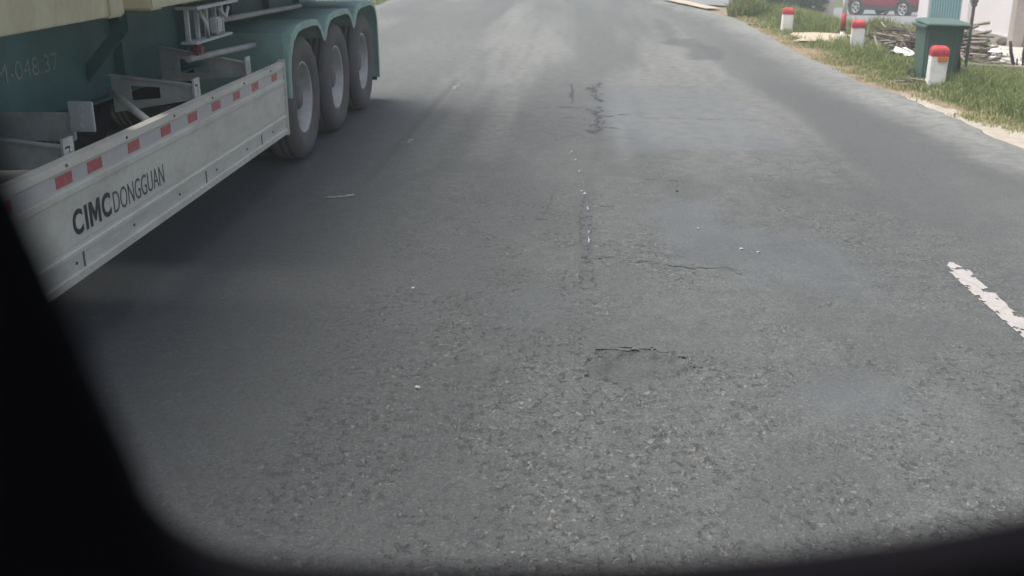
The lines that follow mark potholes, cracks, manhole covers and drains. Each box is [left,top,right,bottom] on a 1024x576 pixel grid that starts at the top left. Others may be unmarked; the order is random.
pothole [584,347,703,389]
crack [540,82,622,134]
crack [631,260,748,274]
